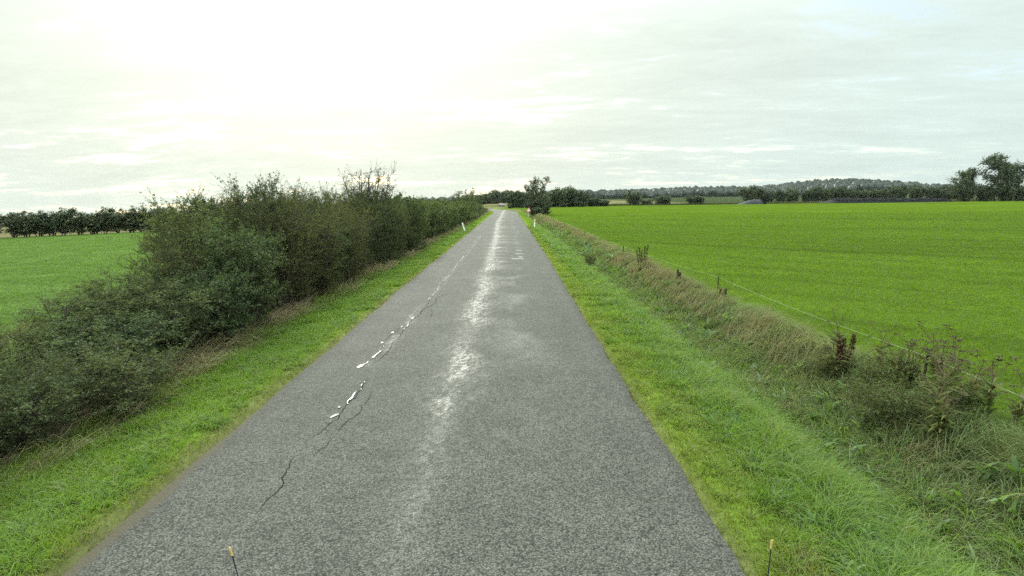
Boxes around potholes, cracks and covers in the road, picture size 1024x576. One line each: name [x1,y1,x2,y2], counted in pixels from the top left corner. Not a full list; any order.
crack [261,380,372,507]
